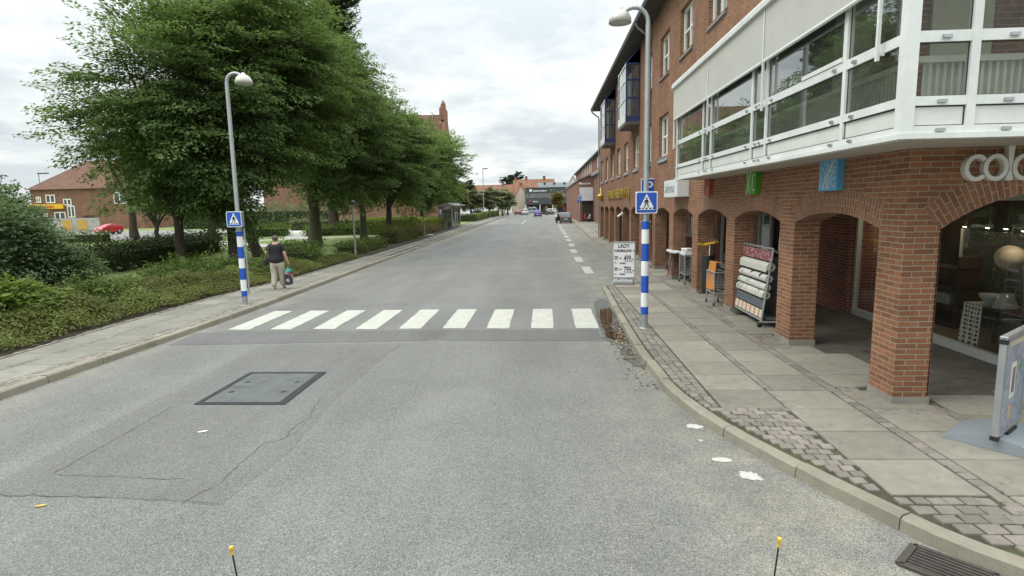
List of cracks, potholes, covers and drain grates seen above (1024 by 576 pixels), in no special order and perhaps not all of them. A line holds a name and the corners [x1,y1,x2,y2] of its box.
drain grate [895,542,1002,576]
crack [0,358,378,505]
manhole cover [194,372,326,405]
